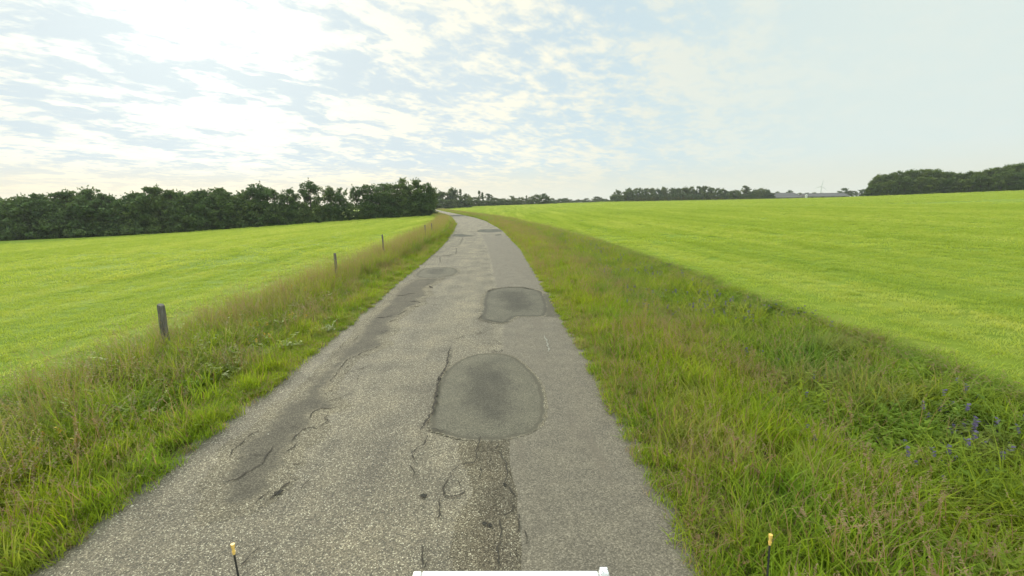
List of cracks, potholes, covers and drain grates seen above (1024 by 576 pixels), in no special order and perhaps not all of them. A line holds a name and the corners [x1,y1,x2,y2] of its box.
crack [435,436,482,518]
crack [410,316,506,476]
crack [228,280,433,502]
crack [496,514,527,563]
